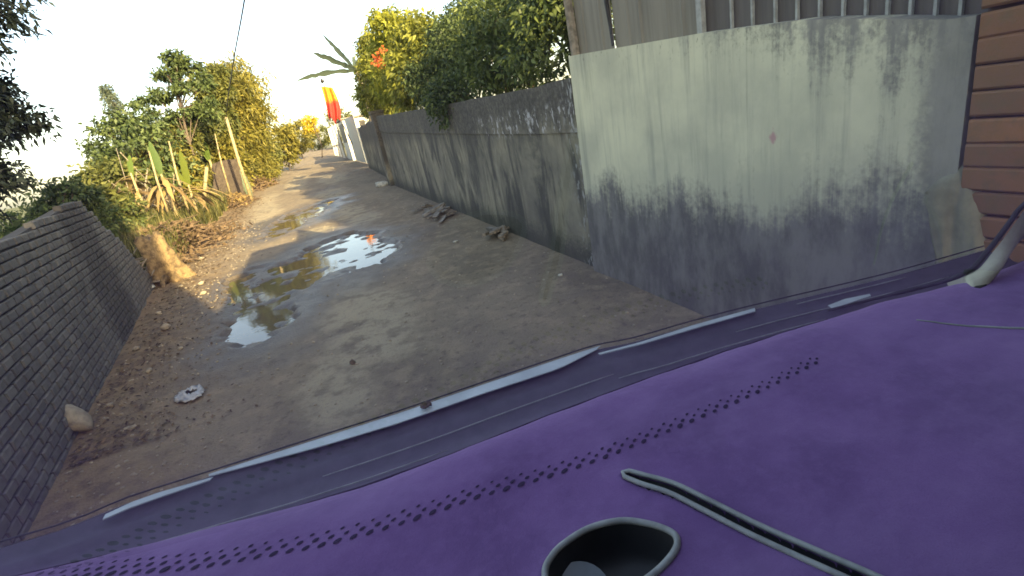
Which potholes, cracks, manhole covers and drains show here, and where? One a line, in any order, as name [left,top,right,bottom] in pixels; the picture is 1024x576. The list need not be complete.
pothole [253,198,339,241]
pothole [209,230,403,349]
